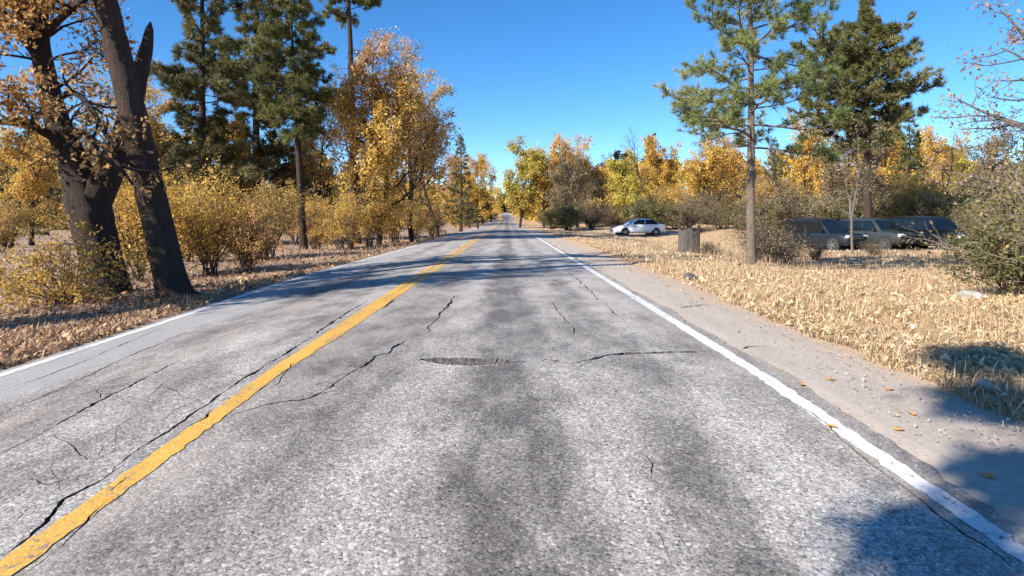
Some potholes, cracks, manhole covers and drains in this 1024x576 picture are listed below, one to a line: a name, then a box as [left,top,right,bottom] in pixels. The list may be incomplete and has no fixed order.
crack [1,297,454,576]
pothole [416,357,517,367]
crack [524,351,696,367]
